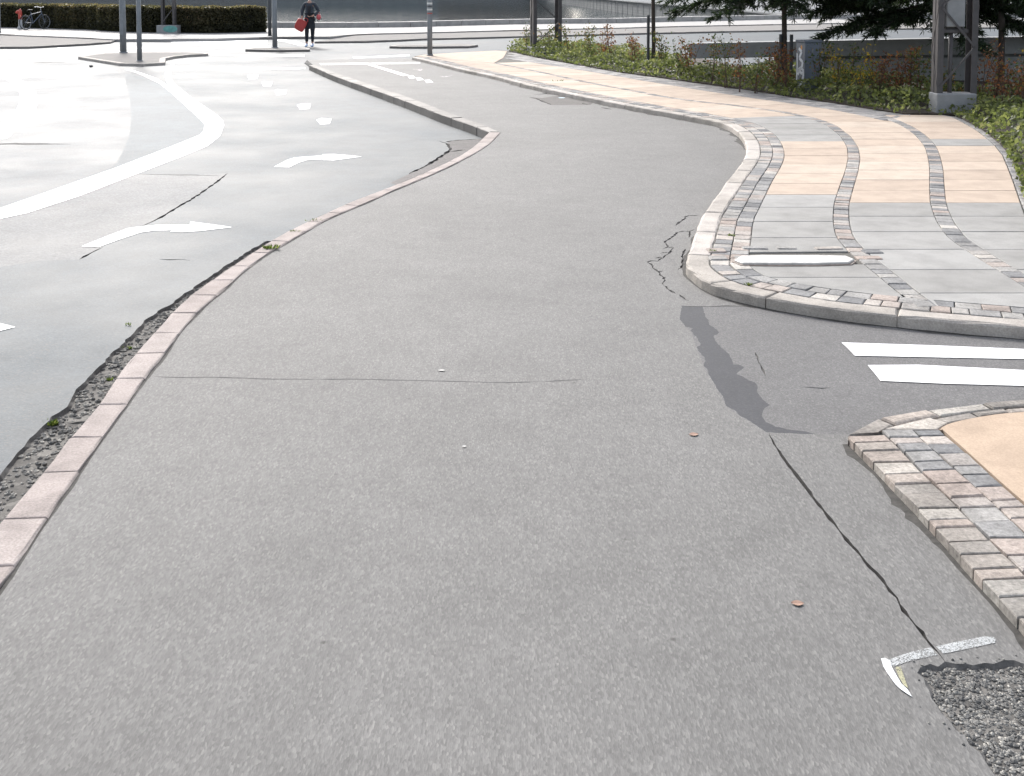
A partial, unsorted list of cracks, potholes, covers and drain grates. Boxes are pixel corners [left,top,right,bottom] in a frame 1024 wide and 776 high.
crack [80,174,226,259]
pothole [911,651,1024,776]
crack [769,434,944,660]
crack [409,139,474,174]
crack [647,215,761,308]
